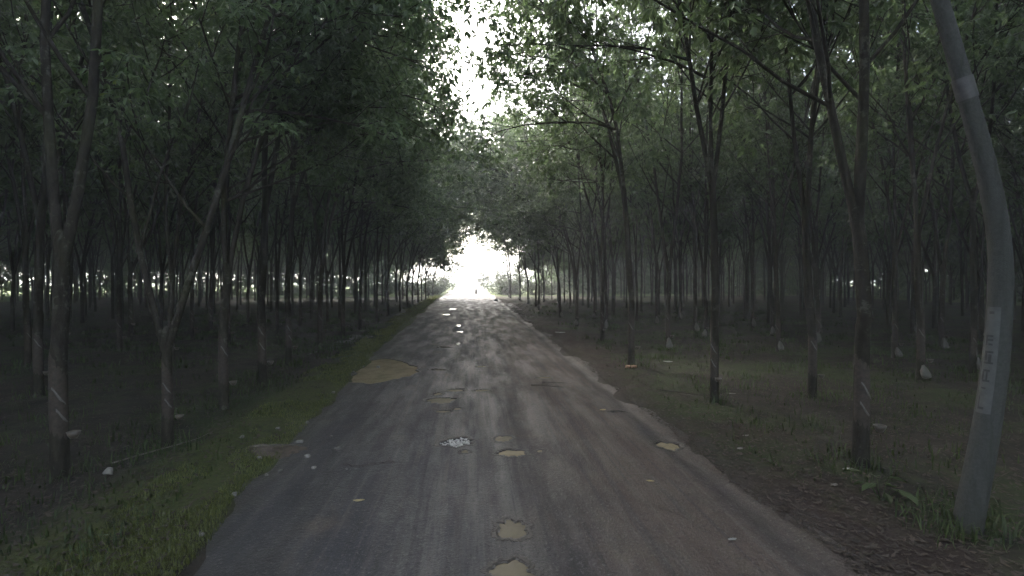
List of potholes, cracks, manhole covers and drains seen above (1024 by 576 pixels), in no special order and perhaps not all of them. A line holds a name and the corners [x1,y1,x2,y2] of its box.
pothole [348,358,421,385]
pothole [422,397,461,405]
pothole [434,435,480,449]
pothole [491,516,534,543]
pothole [491,447,532,458]
pothole [649,439,686,452]
pothole [479,553,544,576]
pothole [490,434,517,444]
